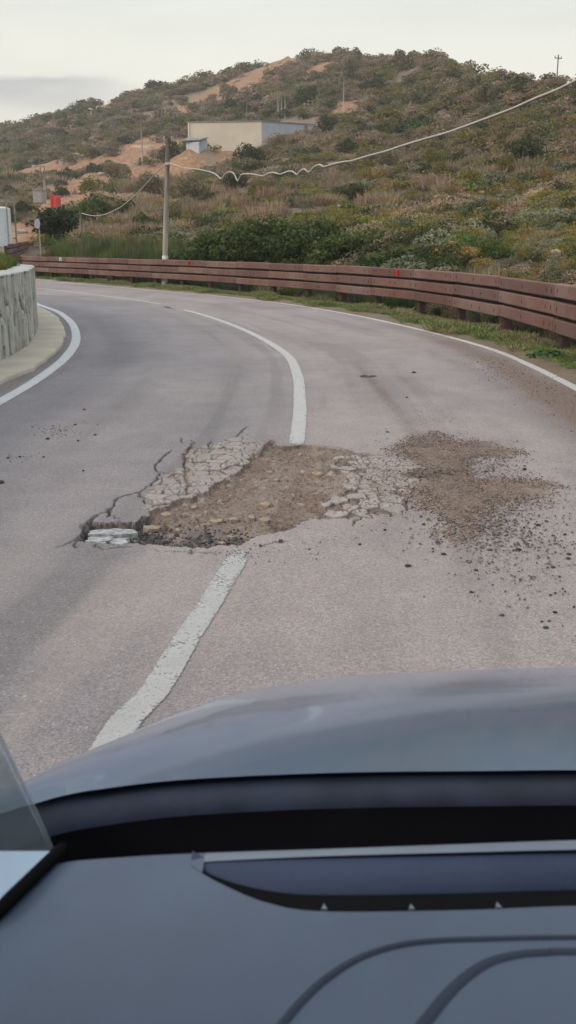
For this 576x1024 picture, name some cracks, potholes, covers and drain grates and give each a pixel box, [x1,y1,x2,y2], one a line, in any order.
pothole [82,440,355,549]
crack [59,426,264,550]
